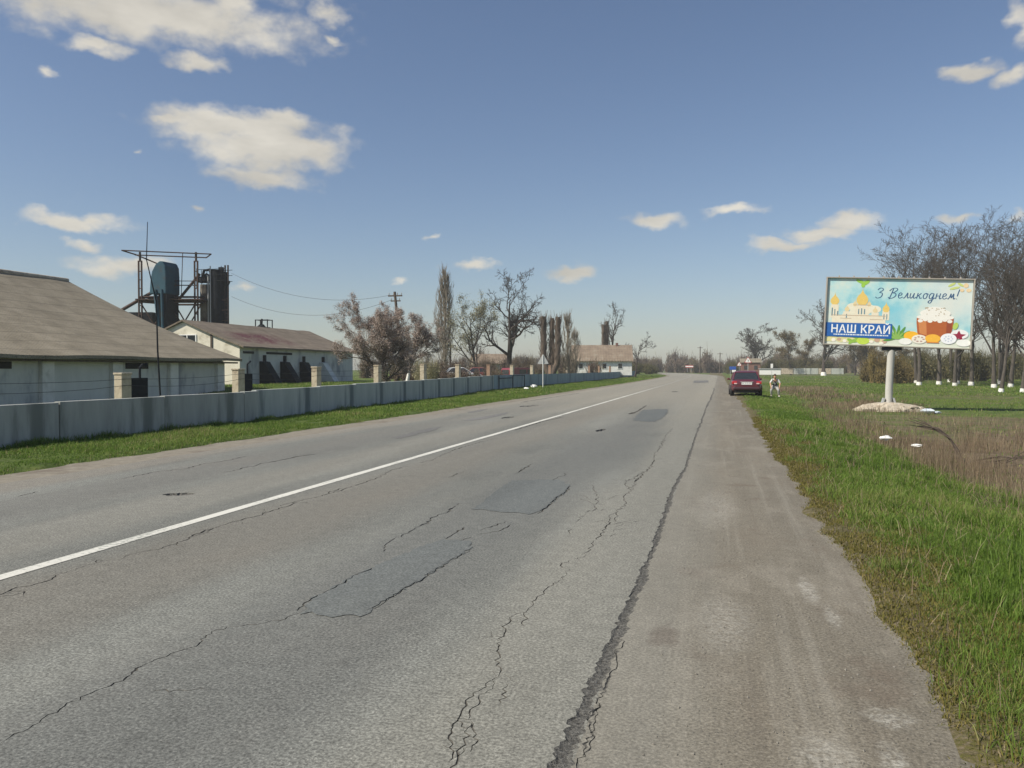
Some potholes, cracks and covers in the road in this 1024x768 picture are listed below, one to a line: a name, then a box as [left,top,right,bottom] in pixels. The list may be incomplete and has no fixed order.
crack [442,388,715,768]
crack [6,613,298,740]
